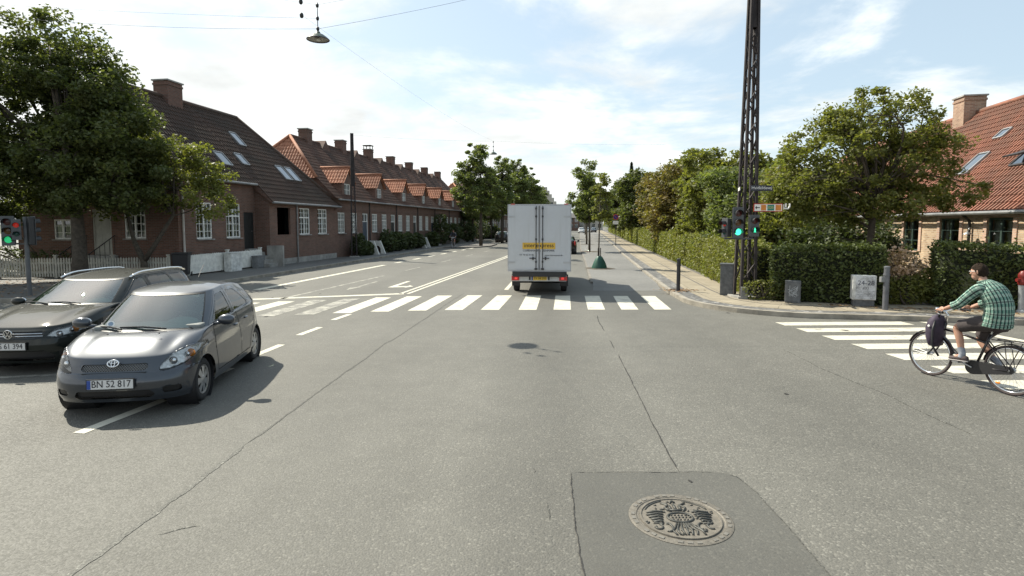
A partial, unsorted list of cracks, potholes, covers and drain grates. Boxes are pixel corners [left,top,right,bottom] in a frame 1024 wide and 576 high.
crack [66,445,244,576]
manhole cover [629,494,735,546]
